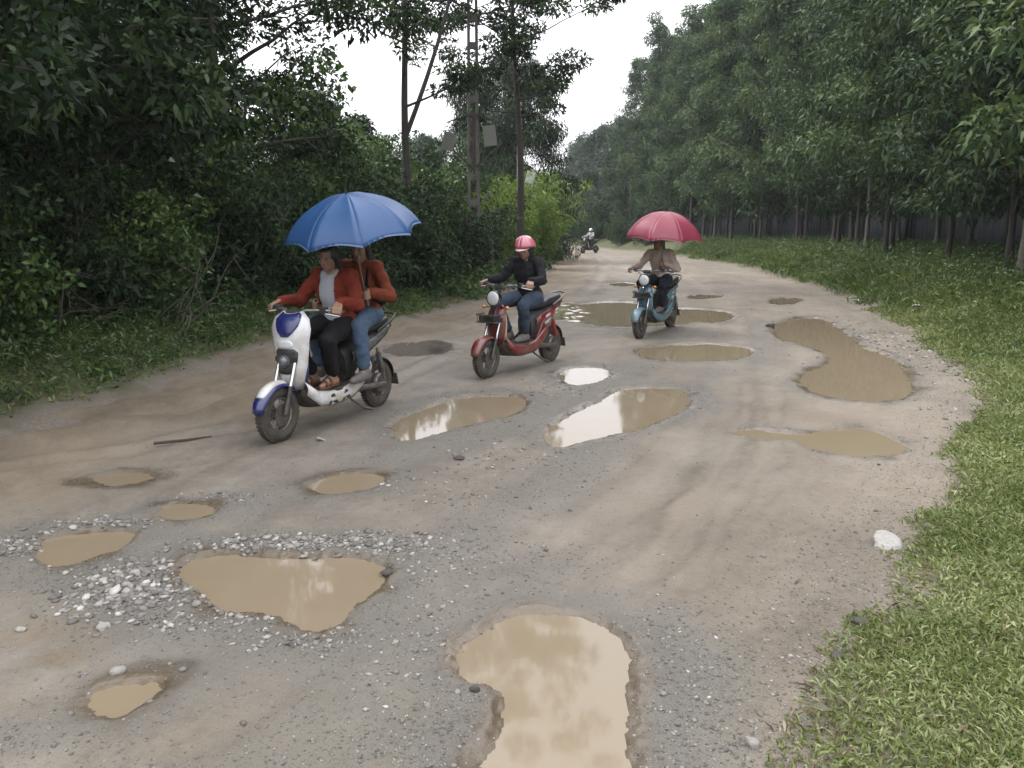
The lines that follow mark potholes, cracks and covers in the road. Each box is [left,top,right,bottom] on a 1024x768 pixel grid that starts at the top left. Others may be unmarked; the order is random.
pothole [529,384,703,450]
pothole [551,365,619,386]
pothole [163,546,405,637]
pothole [436,601,660,768]
pothole [763,316,929,403]
pothole [298,468,395,497]
pothole [380,391,537,442]
pothole [24,524,151,569]
pothole [143,500,226,522]
pothole [81,468,165,488]
pothole [722,424,918,459]
pothole [765,297,803,305]
